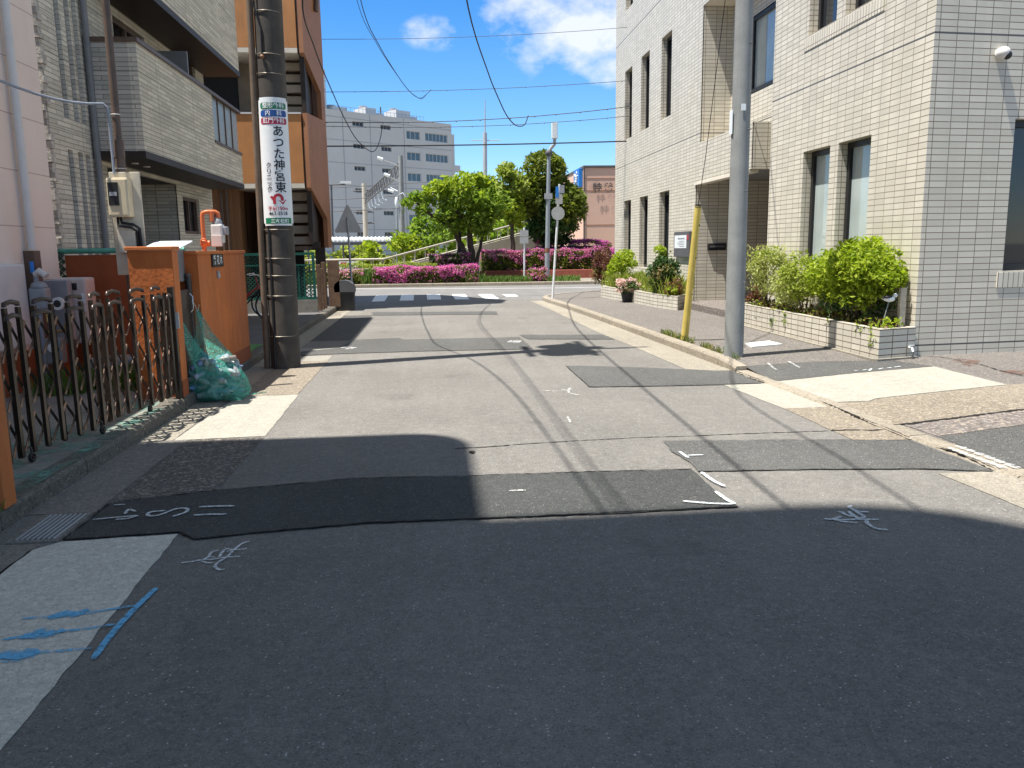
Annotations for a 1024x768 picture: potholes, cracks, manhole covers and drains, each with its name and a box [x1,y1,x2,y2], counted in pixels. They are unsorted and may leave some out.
drain grate [4,512,93,545]
